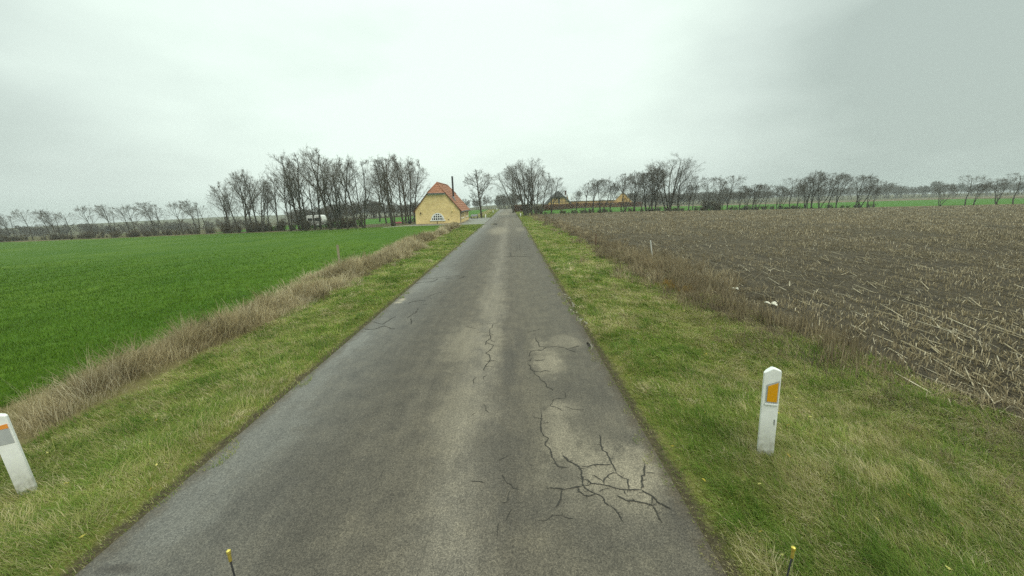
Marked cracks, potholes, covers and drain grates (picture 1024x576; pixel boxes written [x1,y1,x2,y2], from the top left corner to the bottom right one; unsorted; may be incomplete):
crack [497,455,517,537]
crack [528,331,672,522]
crack [368,277,463,330]
crack [467,323,495,383]
